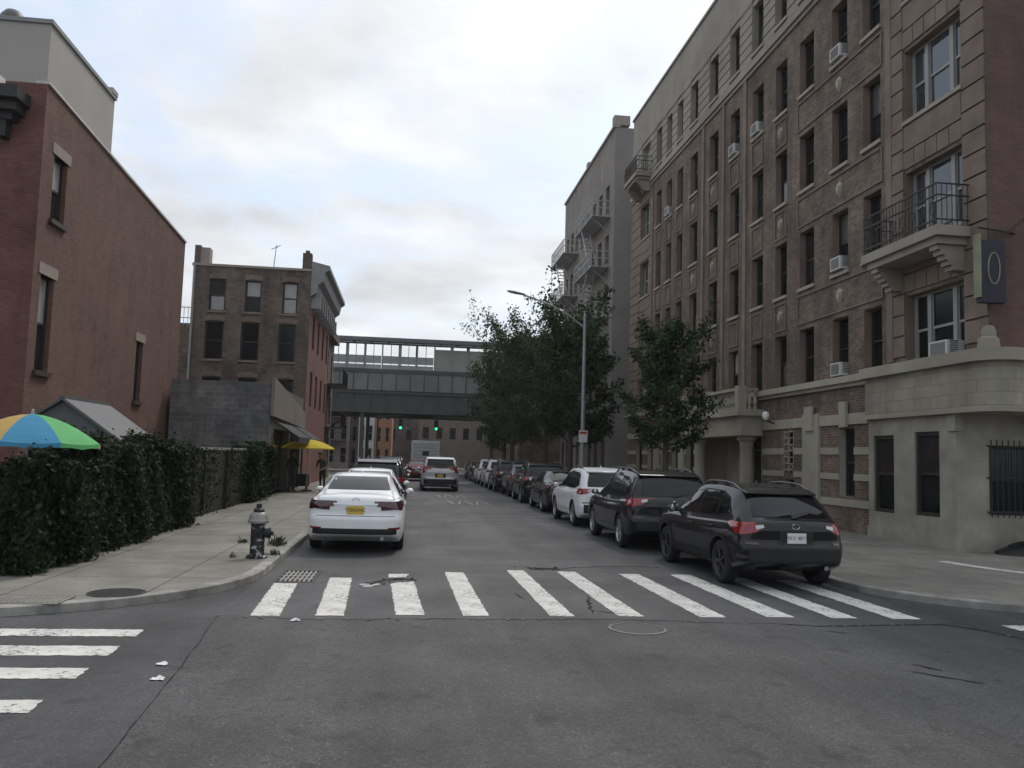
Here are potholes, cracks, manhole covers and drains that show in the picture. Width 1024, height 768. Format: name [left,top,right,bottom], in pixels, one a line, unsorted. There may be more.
crack [911,664,986,684]
manhole cover [86,588,147,597]
drain grate [274,570,322,582]
manhole cover [608,623,667,635]
